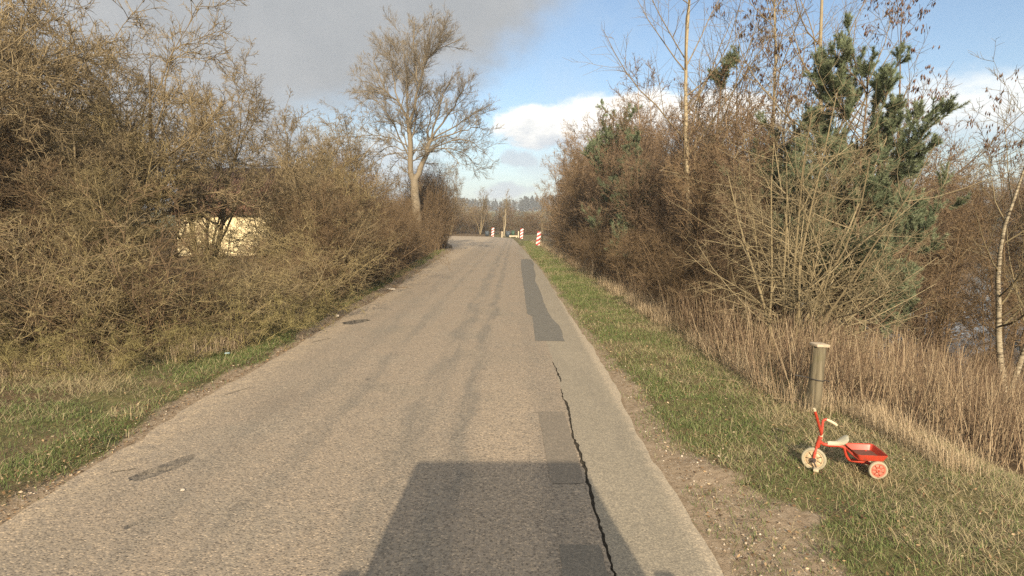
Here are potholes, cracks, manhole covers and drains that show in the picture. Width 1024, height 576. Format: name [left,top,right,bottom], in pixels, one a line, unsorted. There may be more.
crack [552,362,617,576]
